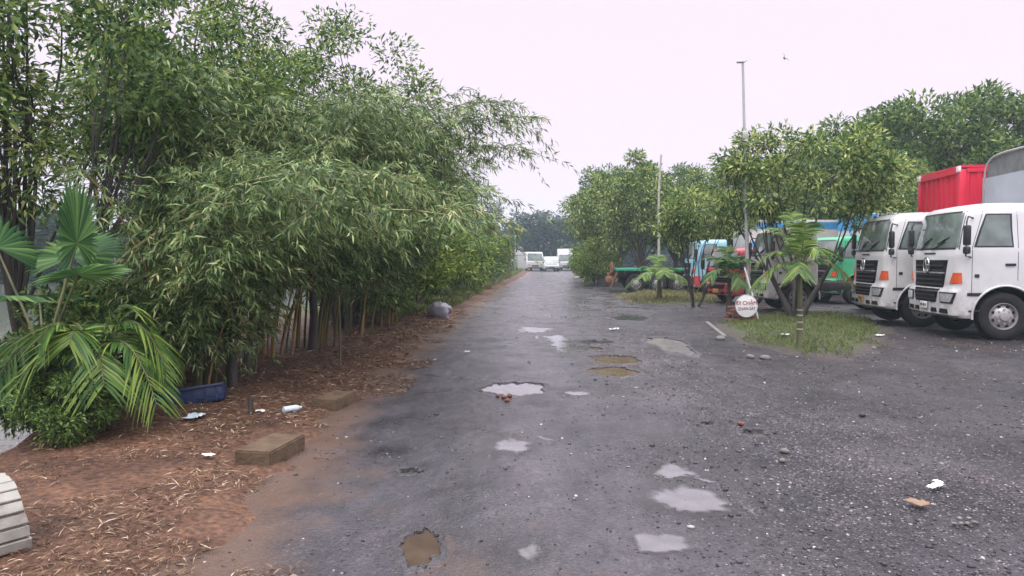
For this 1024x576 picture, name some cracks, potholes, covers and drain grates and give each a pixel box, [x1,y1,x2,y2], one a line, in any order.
pothole [393,467,428,476]
pothole [581,366,645,378]
pothole [476,381,550,398]
pothole [391,523,448,576]
pothole [582,354,649,366]
pothole [641,336,702,359]
pothole [606,313,652,322]
